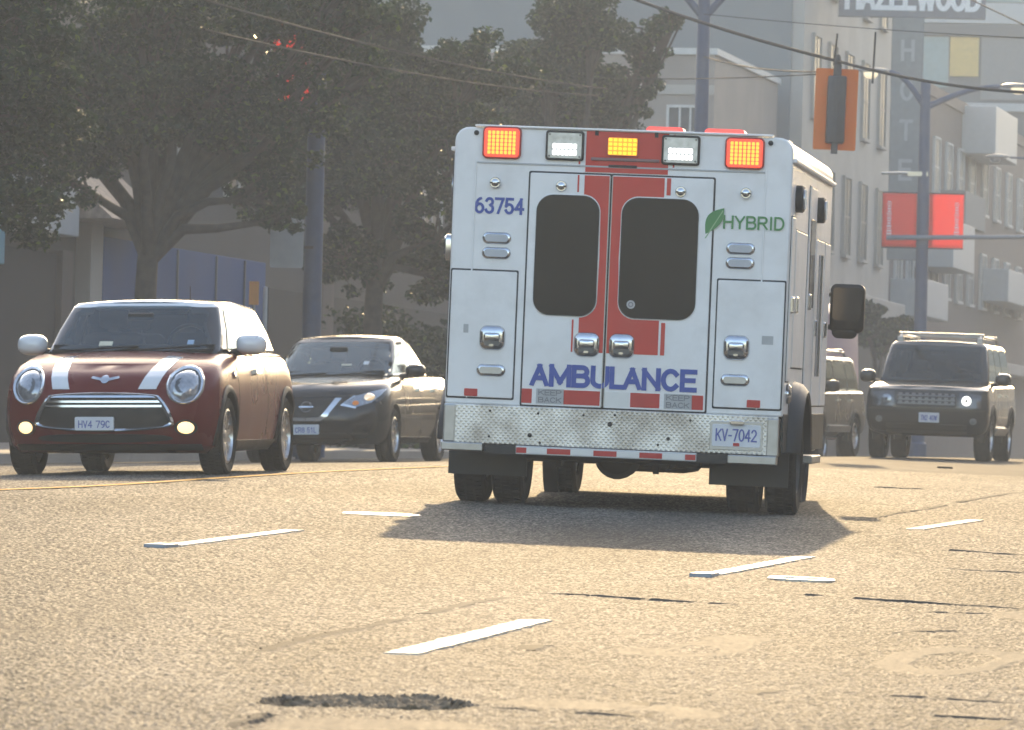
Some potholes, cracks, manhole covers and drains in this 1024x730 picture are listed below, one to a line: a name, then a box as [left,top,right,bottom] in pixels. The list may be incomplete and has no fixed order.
crack [757,592,1021,634]
pothole [257,692,479,711]
crack [542,593,737,605]
crack [921,549,1023,573]
crack [832,691,1024,730]
crack [861,486,1021,520]
